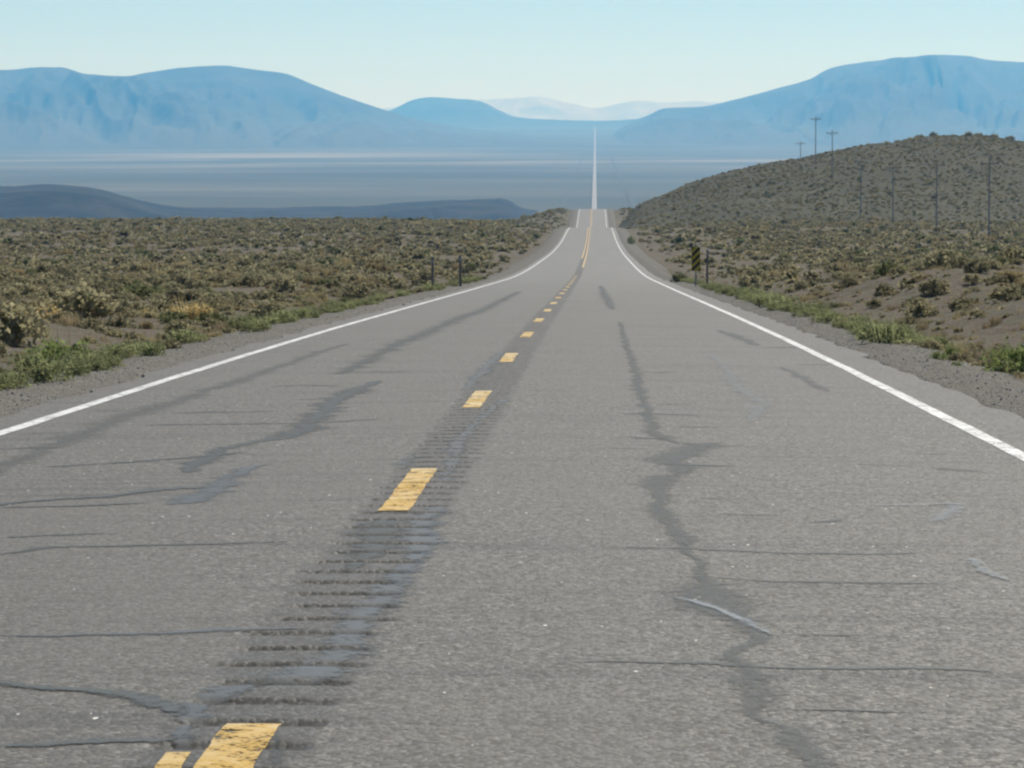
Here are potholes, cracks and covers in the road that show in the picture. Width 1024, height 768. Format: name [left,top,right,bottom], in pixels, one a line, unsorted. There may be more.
crack [0,533,287,554]
